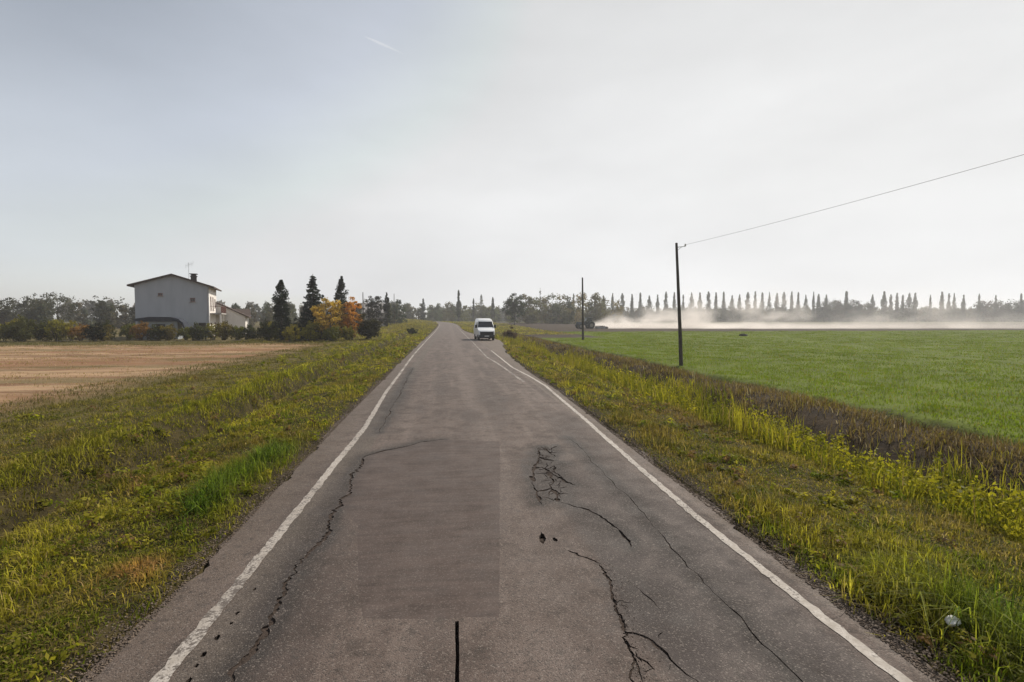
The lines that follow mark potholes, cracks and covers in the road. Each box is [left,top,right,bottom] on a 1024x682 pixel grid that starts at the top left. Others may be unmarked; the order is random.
crack [227,370,444,682]
crack [529,443,803,682]
